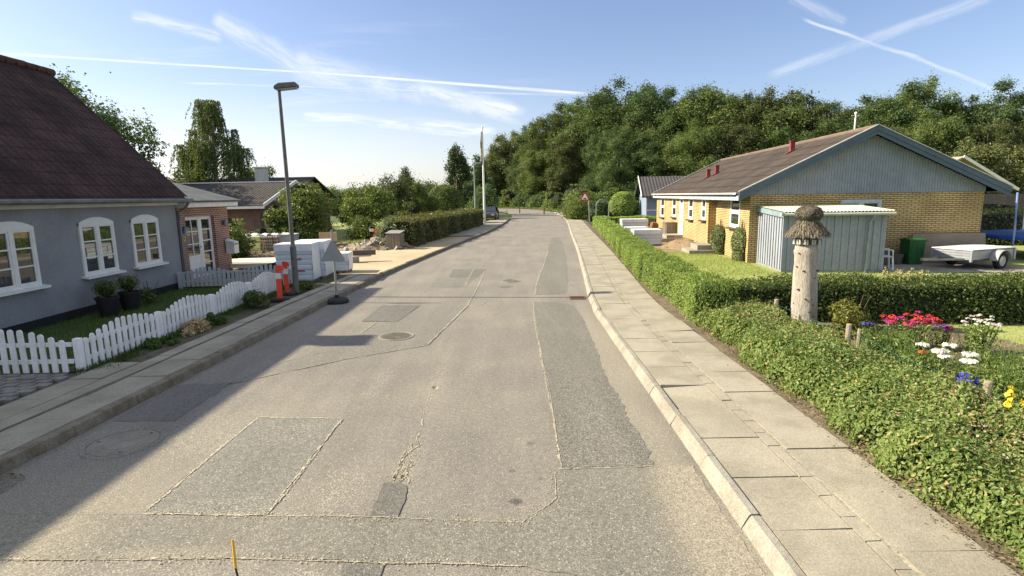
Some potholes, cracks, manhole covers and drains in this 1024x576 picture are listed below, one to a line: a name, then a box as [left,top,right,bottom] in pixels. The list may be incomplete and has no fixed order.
manhole cover [378,332,414,341]
crack [8,251,655,526]
manhole cover [78,427,166,460]
